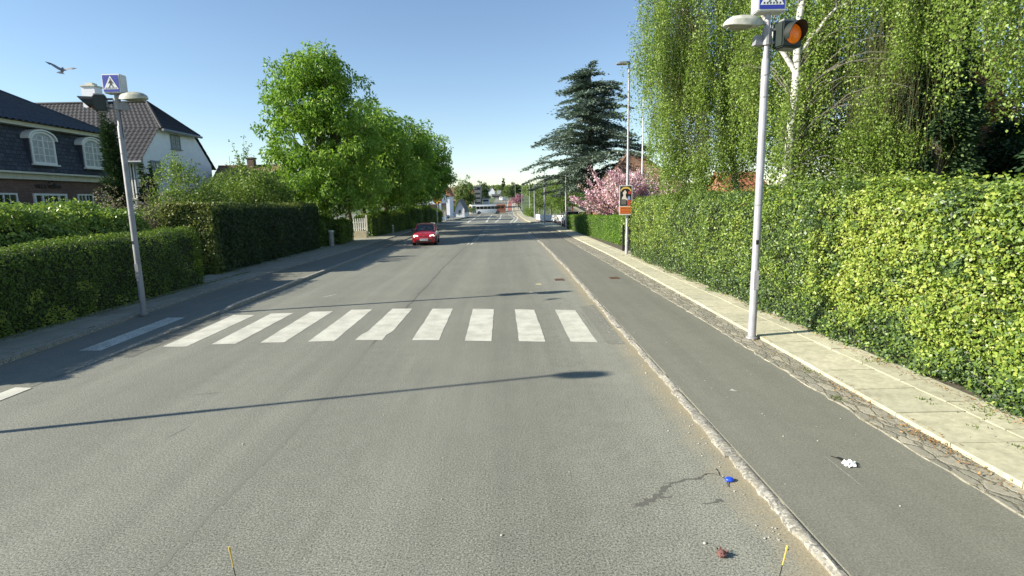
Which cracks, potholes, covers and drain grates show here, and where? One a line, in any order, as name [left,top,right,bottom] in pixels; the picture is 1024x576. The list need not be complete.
crack [633,468,725,507]
